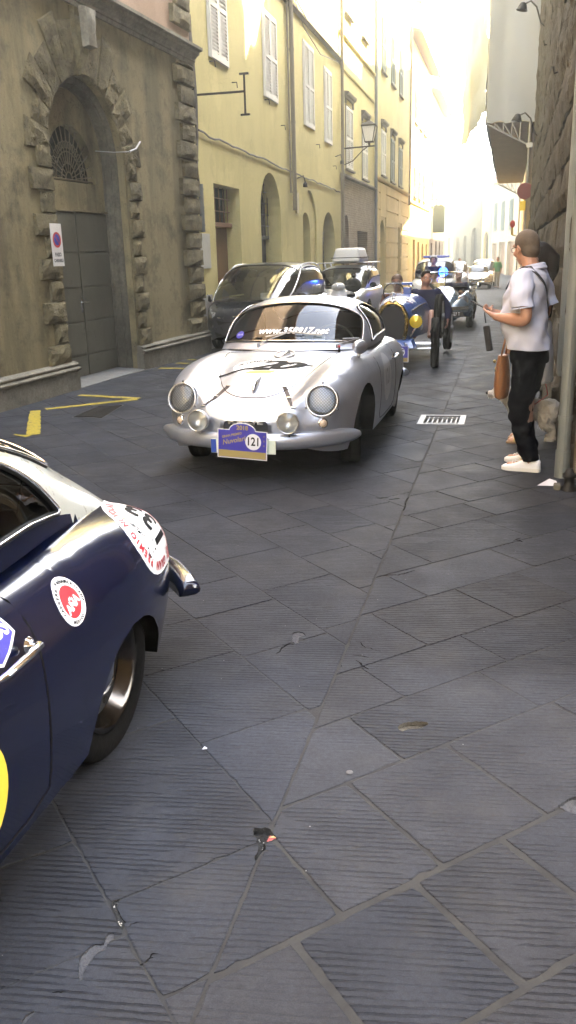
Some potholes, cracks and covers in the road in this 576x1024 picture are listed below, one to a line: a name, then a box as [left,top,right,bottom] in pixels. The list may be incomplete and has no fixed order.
pothole [78,932,115,981]
drain grate [417,415,467,425]
pothole [557,797,576,814]
